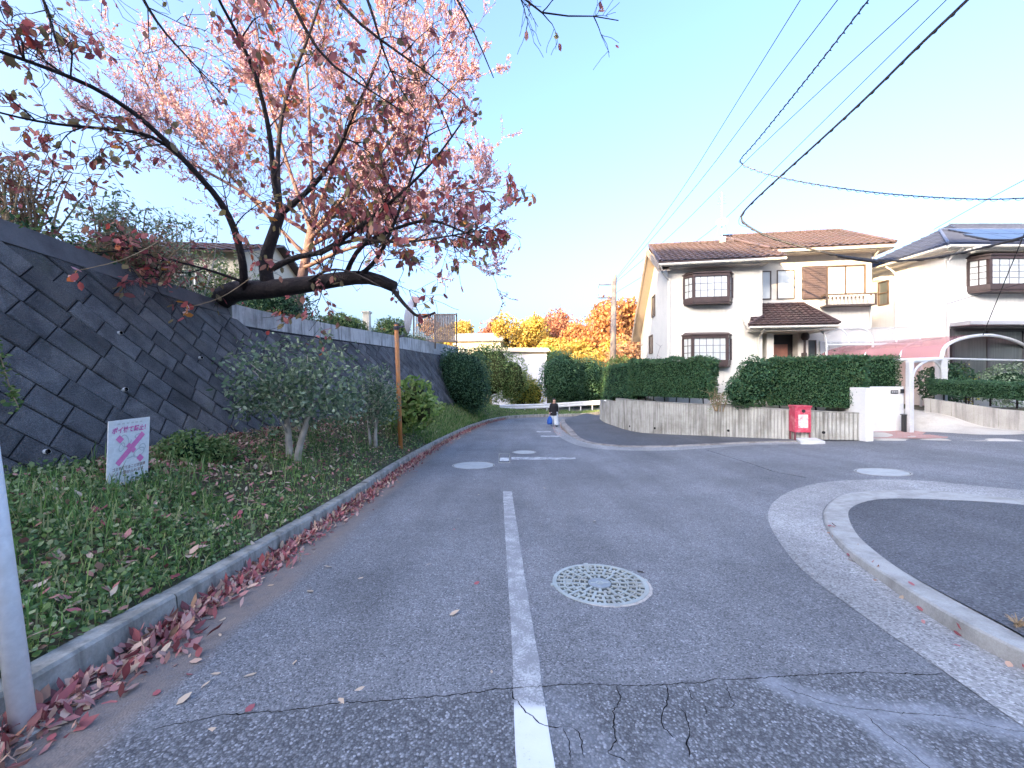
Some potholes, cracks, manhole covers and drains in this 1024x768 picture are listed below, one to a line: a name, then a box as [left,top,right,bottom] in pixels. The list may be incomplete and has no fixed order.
crack [155,672,944,762]
crack [783,681,1024,768]
manhole cover [551,563,653,608]
manhole cover [853,468,913,476]
